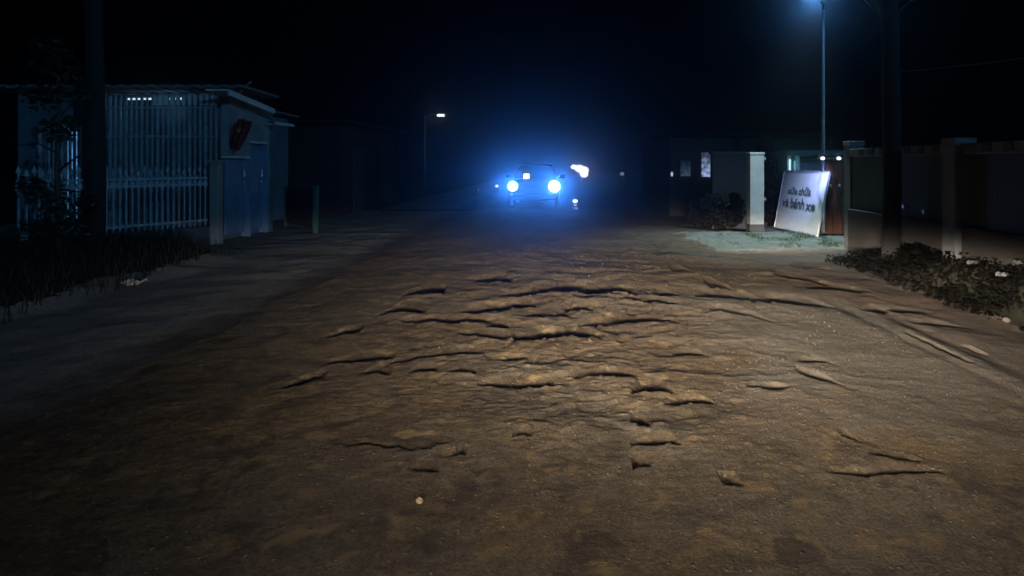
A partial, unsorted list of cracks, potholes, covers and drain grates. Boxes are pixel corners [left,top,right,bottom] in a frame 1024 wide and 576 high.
crack [794,356,843,386]
crack [407,459,440,473]
crack [576,324,628,363]
crack [671,347,707,356]
crack [280,372,327,389]
crack [836,428,925,463]
crack [903,318,992,363]
crack [374,309,577,368]
crack [623,264,693,305]
crack [703,271,834,323]
